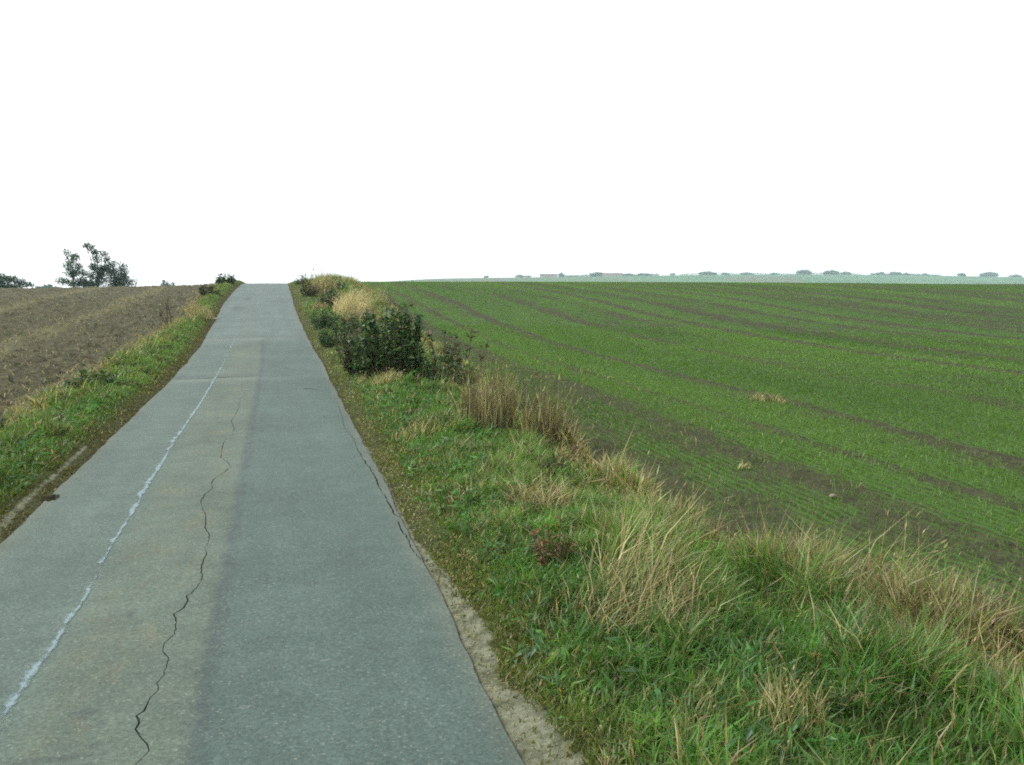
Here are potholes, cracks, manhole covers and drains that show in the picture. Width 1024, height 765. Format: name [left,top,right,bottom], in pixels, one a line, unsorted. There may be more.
crack [337,402,421,559]
crack [135,394,246,765]
